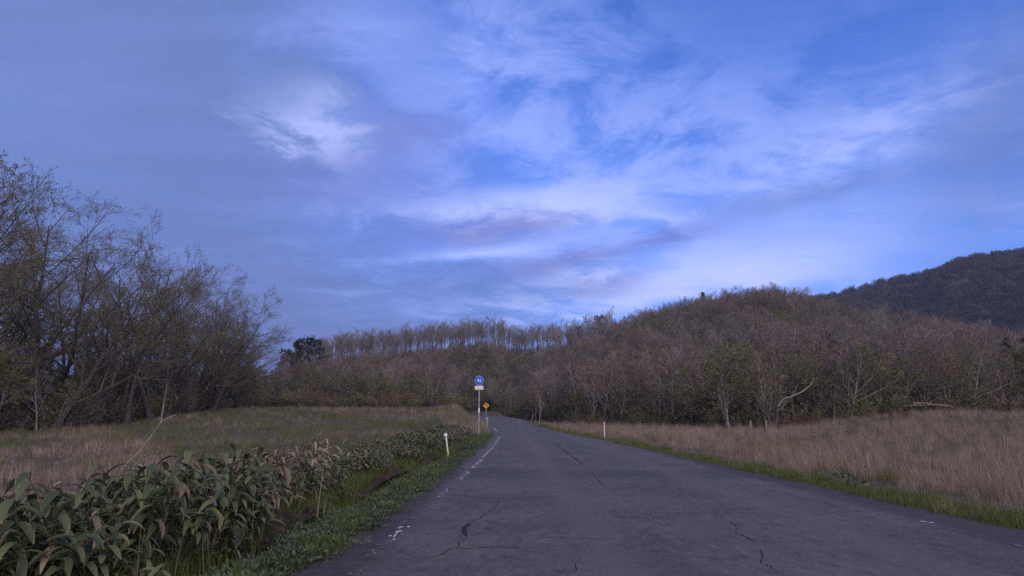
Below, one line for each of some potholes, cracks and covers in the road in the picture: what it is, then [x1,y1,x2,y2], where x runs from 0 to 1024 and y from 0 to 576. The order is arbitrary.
crack [433,496,548,557]
crack [720,516,785,575]
